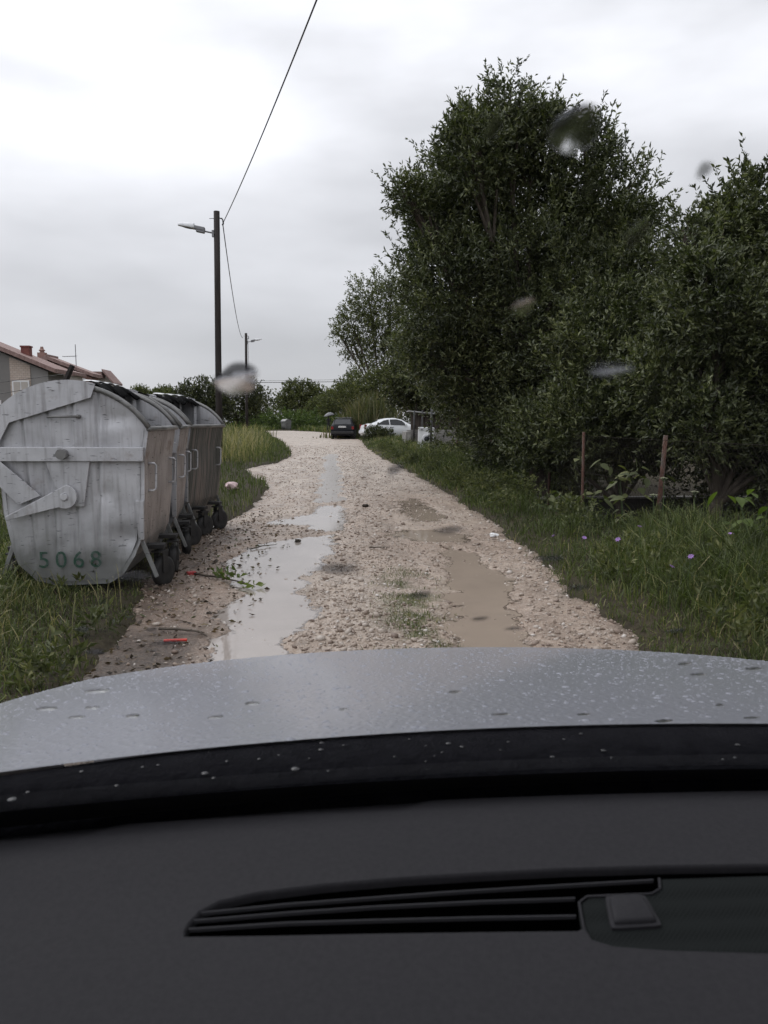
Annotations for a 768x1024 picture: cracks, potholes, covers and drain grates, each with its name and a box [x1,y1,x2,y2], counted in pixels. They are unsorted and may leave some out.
pothole [179,531,351,665]
pothole [417,543,553,648]
pothole [242,504,357,533]
